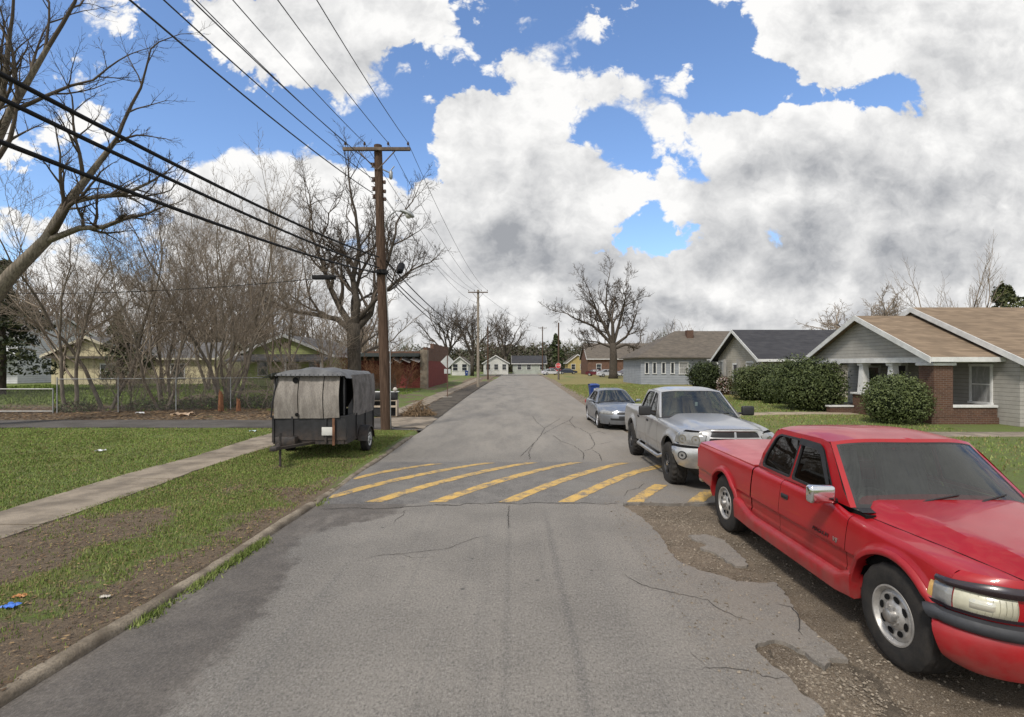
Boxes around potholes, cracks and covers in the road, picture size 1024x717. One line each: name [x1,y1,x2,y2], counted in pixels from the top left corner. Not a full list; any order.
pothole [768,646,906,717]
crack [521,416,605,461]
crack [626,575,751,621]
